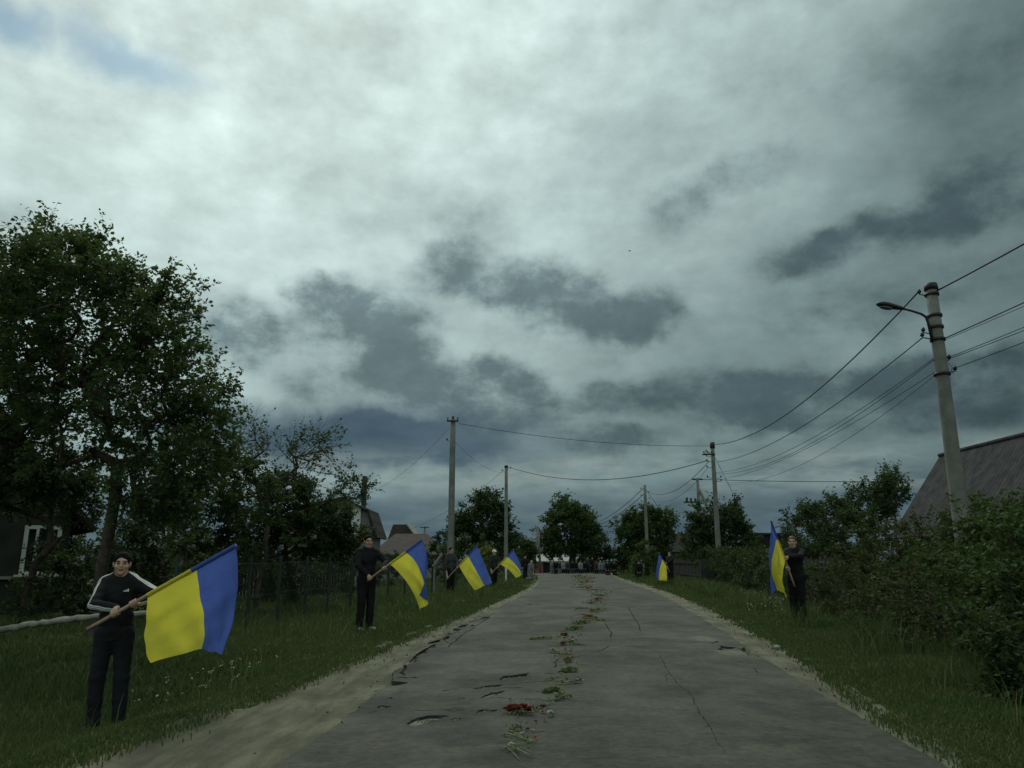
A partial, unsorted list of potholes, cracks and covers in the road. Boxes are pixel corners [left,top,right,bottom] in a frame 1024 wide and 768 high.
crack [660,656,730,758]
crack [596,608,641,652]
pothole [406,715,449,726]
crack [400,612,496,678]
